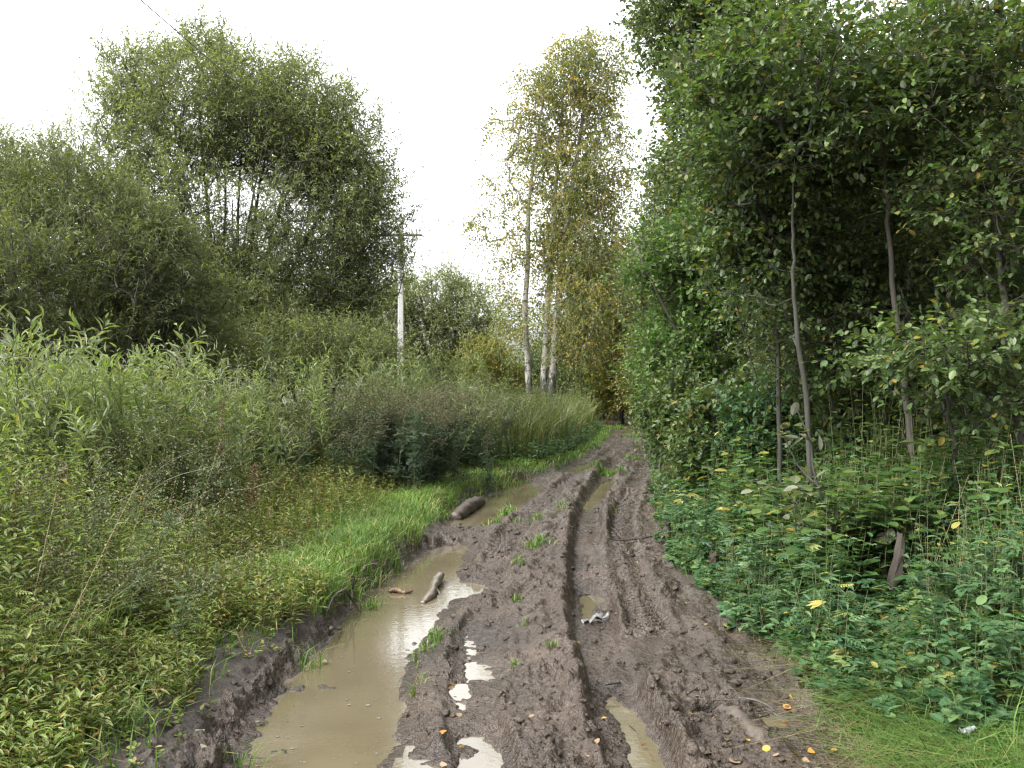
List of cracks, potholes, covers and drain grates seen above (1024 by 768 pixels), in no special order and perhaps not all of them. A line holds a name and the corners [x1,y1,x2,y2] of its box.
pothole [598,687,682,768]
pothole [437,674,482,712]
pothole [581,477,619,510]
pothole [452,630,503,684]
pothole [572,589,611,621]
